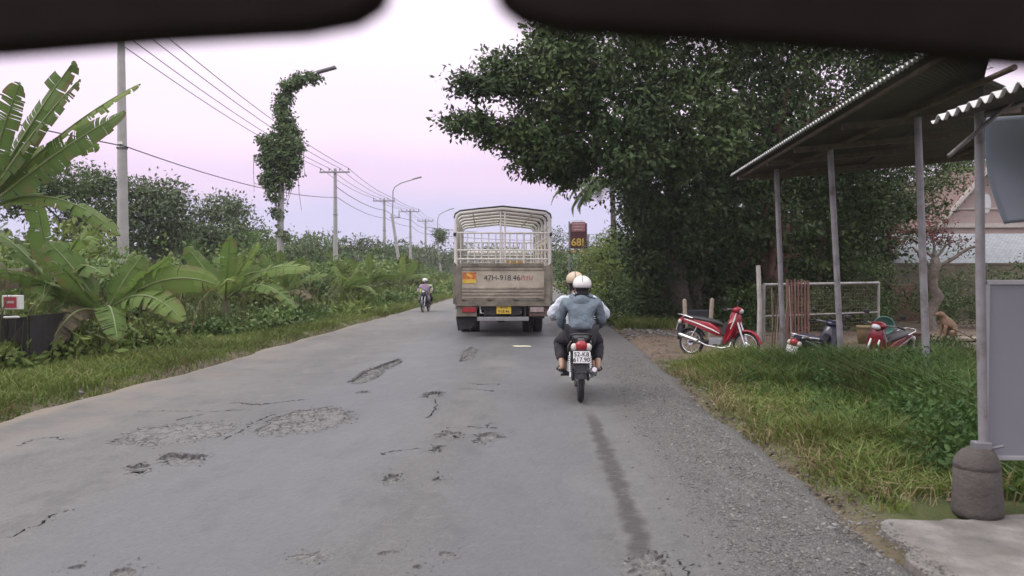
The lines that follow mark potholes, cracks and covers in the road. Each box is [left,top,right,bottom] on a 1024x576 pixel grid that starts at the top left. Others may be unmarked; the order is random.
pothole [460,347,478,362]
pothole [621,547,682,576]
pothole [122,462,154,476]
pothole [431,429,467,439]
pothole [377,472,403,486]
crack [15,436,68,446]
pothole [348,358,402,384]
pothole [104,422,242,447]
pothole [250,406,358,437]
crack [140,399,310,440]
pothole [469,431,511,445]
pothole [152,452,214,466]
